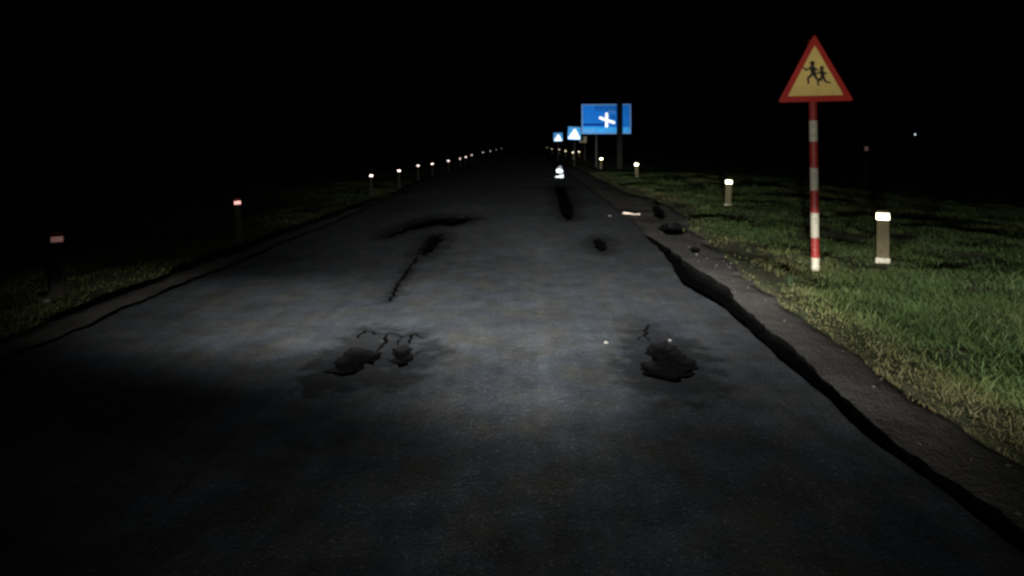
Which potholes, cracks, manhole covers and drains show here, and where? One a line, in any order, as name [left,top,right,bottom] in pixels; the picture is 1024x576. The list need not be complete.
pothole [323,347,382,376]
pothole [657,222,689,235]
pothole [593,238,608,252]
crack [637,235,1024,554]
pothole [381,215,474,238]
pothole [554,185,576,220]
pothole [390,344,415,368]
pothole [651,206,667,220]
crack [357,329,438,362]
pothole [640,340,699,383]
crack [388,256,419,302]
